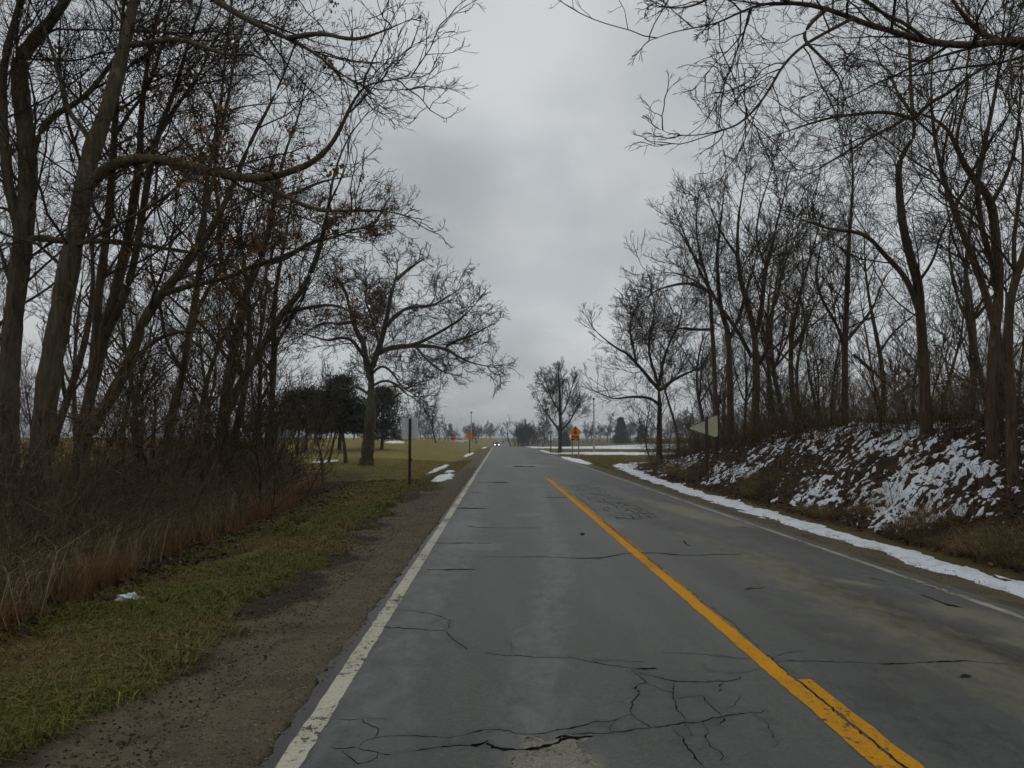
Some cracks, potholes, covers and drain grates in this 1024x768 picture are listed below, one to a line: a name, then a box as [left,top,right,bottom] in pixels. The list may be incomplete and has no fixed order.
crack [335,645,778,764]
crack [781,652,1001,665]
